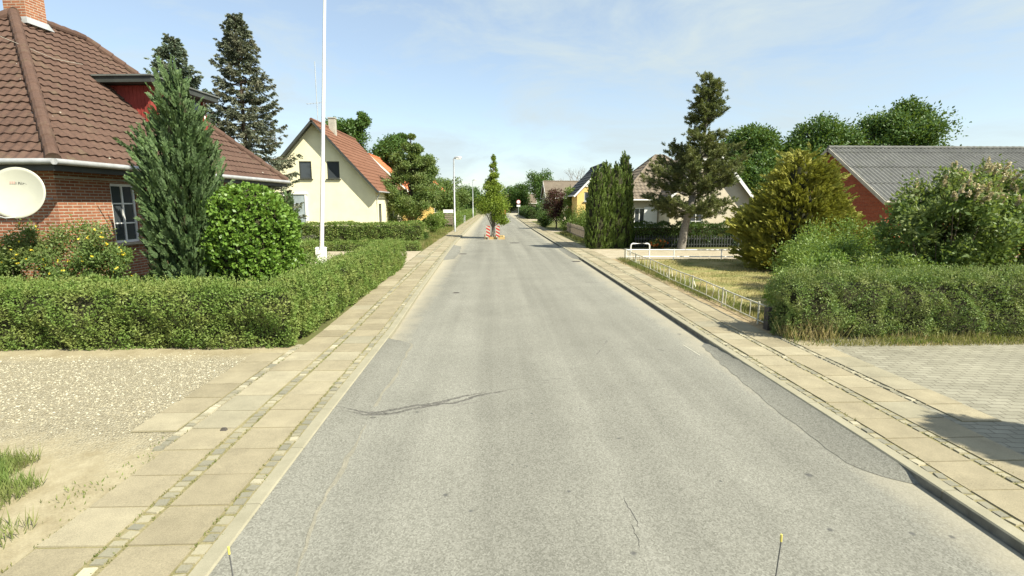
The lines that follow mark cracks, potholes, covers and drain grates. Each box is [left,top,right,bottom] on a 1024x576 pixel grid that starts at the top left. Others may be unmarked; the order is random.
crack [624,500,640,547]
